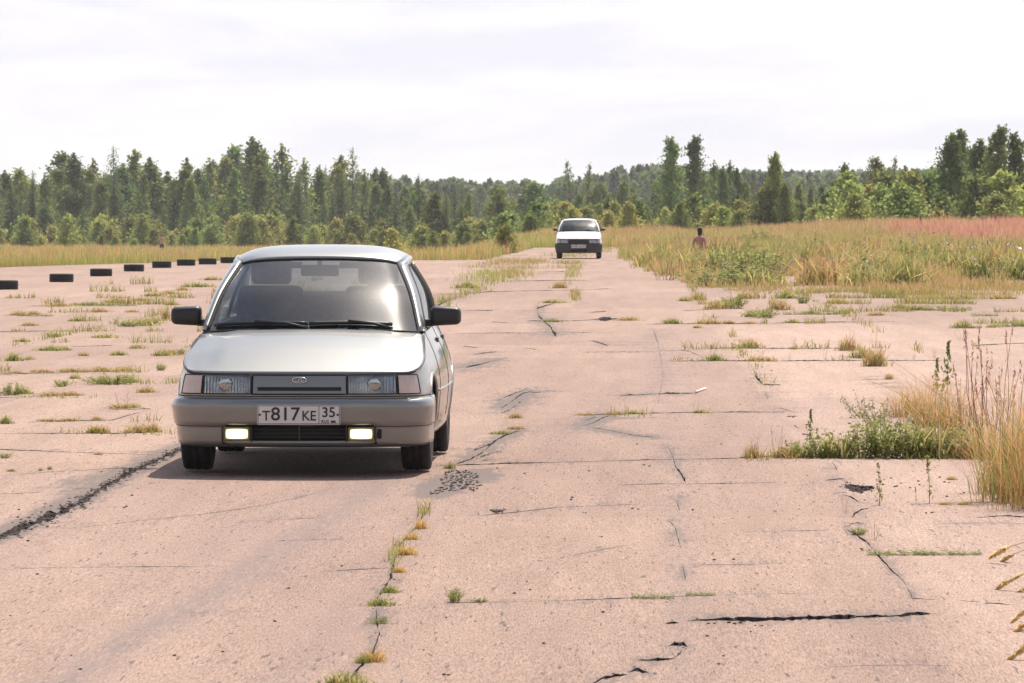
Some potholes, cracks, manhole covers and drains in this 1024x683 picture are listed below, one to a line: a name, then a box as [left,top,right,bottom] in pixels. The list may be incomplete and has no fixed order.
pothole [837,481,878,494]
crack [497,389,540,413]
crack [620,329,690,401]
crack [630,451,766,579]
pothole [429,469,483,495]
crack [457,430,521,464]
